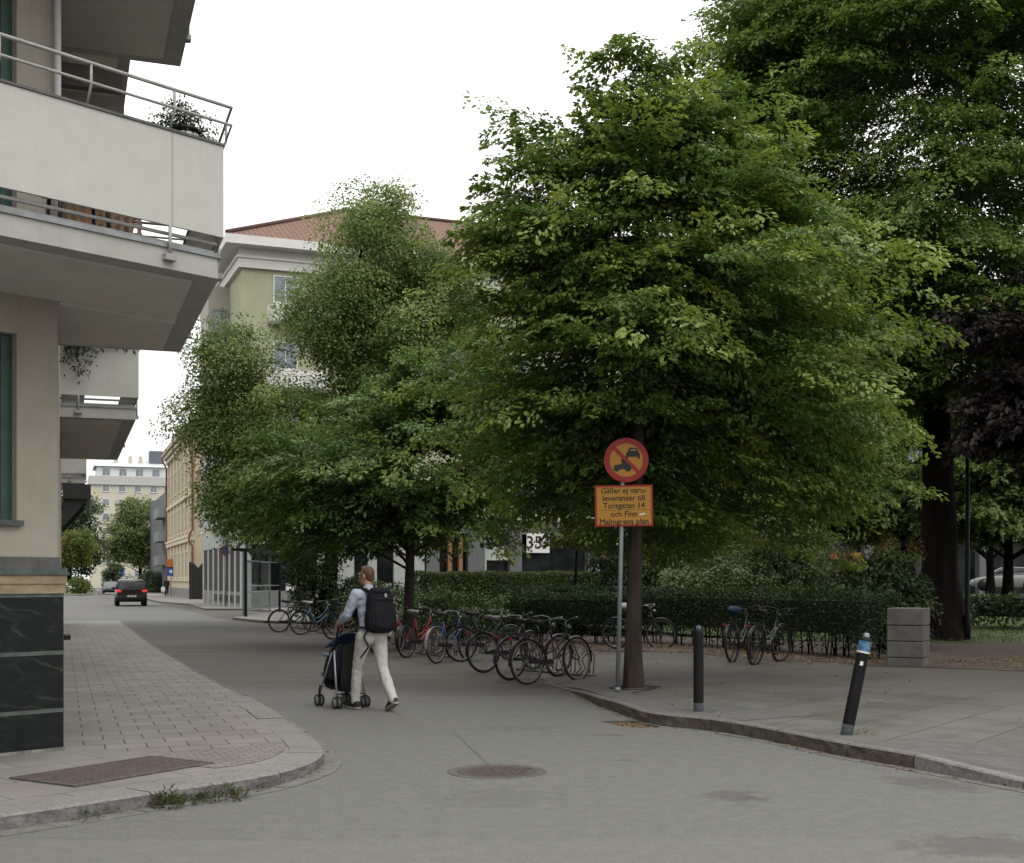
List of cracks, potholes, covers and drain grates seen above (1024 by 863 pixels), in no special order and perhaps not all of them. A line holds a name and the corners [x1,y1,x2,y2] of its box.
utility cover [9,755,214,788]
manhole cover [447,764,547,779]
